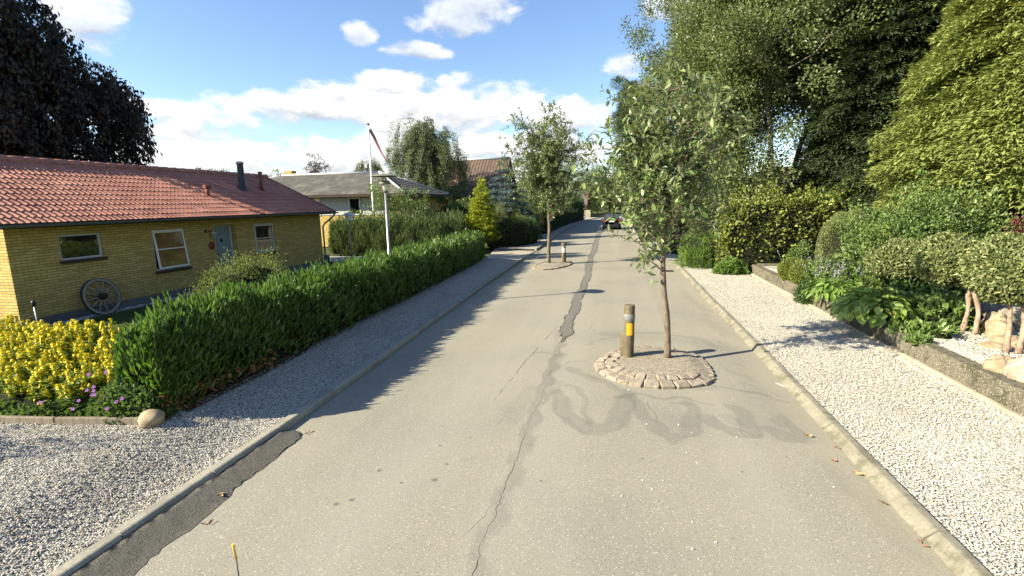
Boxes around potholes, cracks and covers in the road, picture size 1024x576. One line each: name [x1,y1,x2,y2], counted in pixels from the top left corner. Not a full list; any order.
crack [464,333,560,575]
